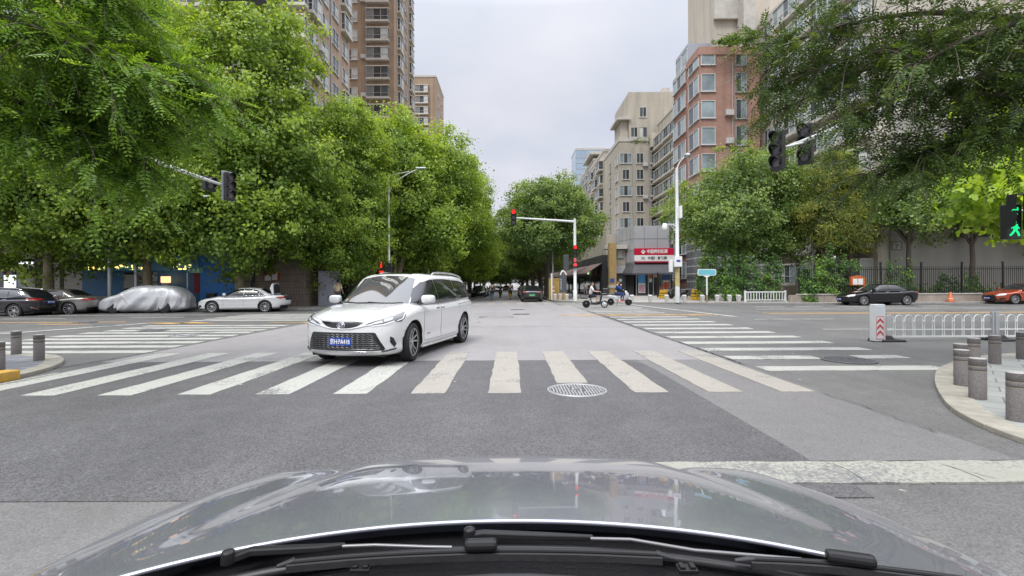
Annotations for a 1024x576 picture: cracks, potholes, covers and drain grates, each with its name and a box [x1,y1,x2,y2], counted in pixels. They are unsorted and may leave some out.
manhole cover [547,383,607,397]
manhole cover [820,356,879,364]
